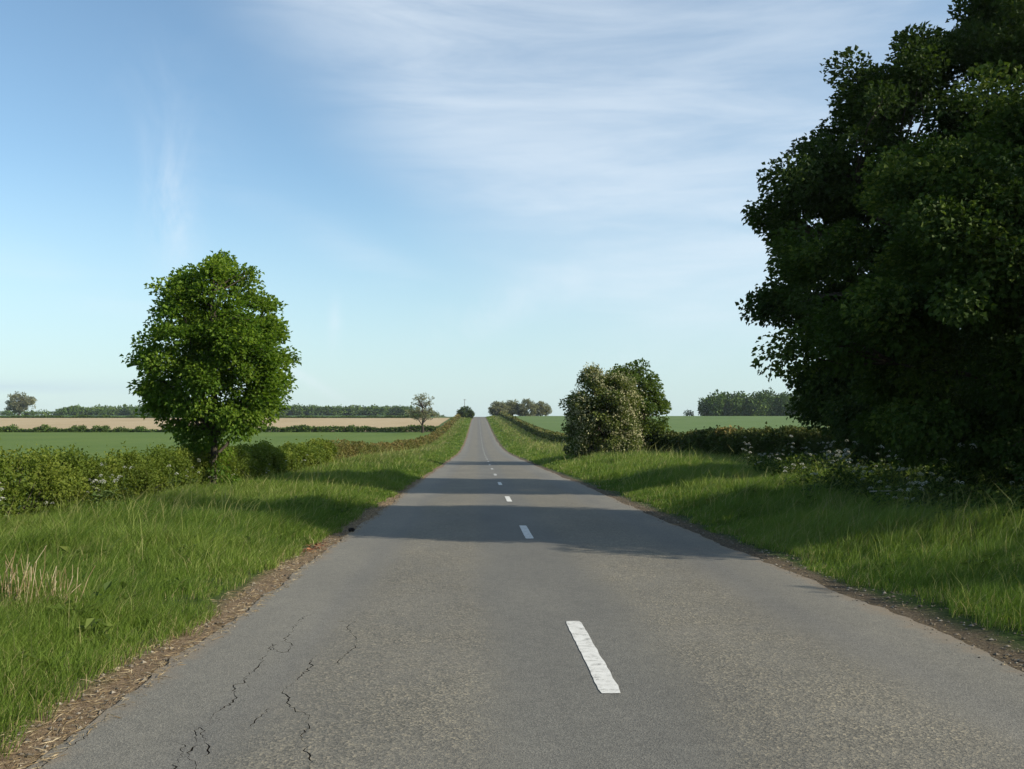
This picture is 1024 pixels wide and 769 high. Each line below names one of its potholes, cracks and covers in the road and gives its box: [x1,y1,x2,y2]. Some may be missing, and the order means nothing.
crack [250,659,314,769]
crack [172,617,303,769]
